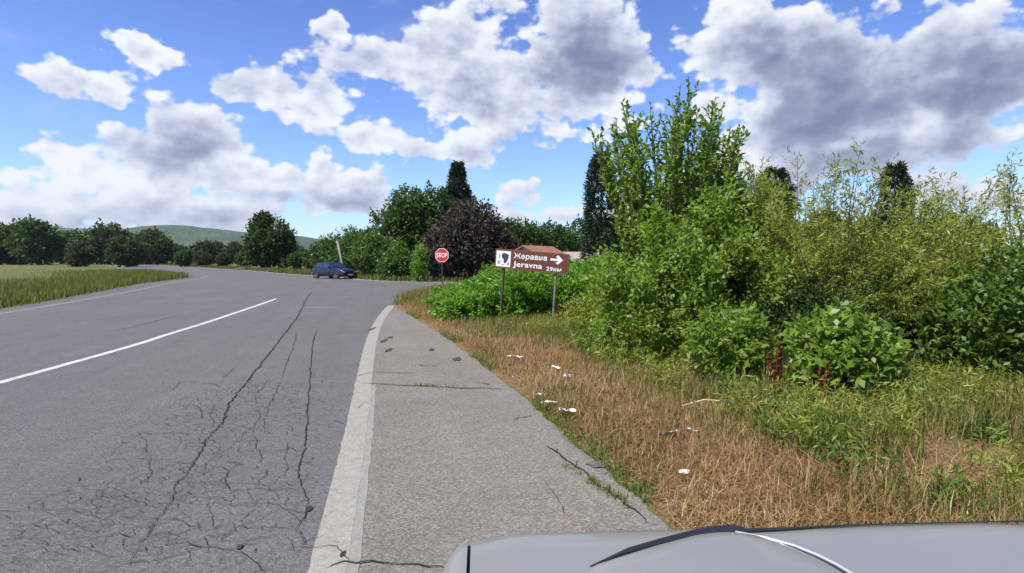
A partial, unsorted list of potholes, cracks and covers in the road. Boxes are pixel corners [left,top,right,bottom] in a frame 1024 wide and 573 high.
crack [546,445,655,523]
crack [1,294,498,573]
